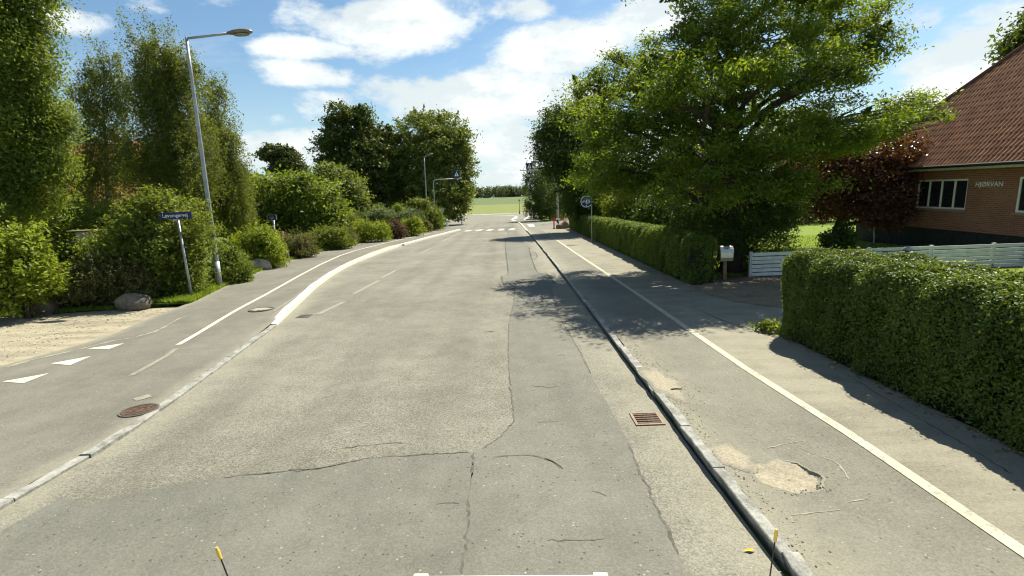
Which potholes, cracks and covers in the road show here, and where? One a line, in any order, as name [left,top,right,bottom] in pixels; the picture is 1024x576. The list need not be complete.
drain grate [629,412,666,426]
crack [226,442,466,478]
manhole cover [118,403,160,417]
pothole [750,459,832,496]
crack [628,442,679,554]
crack [483,229,591,469]
